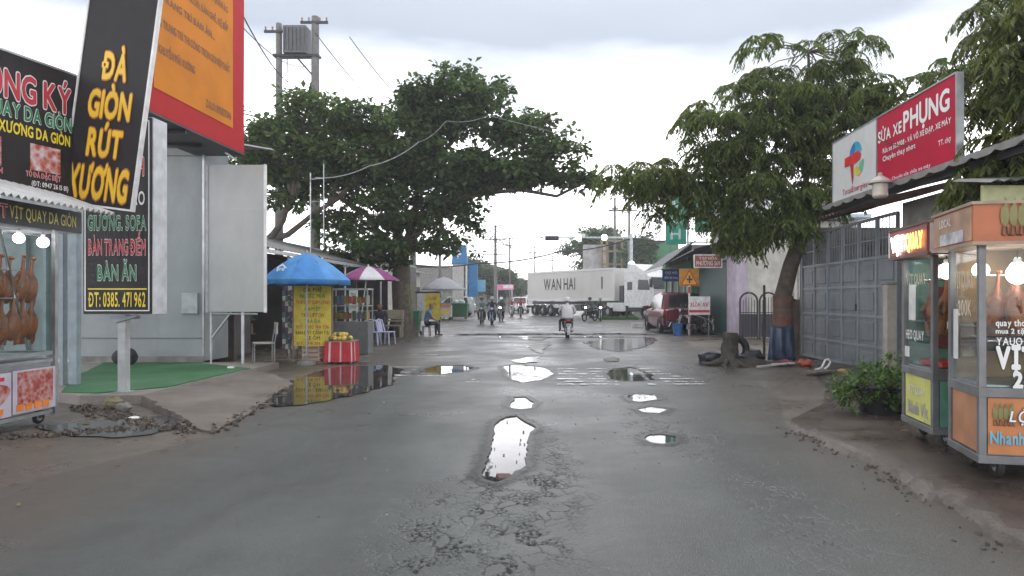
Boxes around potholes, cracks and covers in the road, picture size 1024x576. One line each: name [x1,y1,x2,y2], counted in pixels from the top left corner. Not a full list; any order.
pothole [471,414,544,484]
pothole [602,366,660,382]
crack [321,392,931,576]
pothole [637,432,686,445]
pothole [500,364,558,383]
pothole [632,405,674,414]
pothole [622,393,664,402]
pothole [413,365,477,375]
pothole [502,396,541,410]
